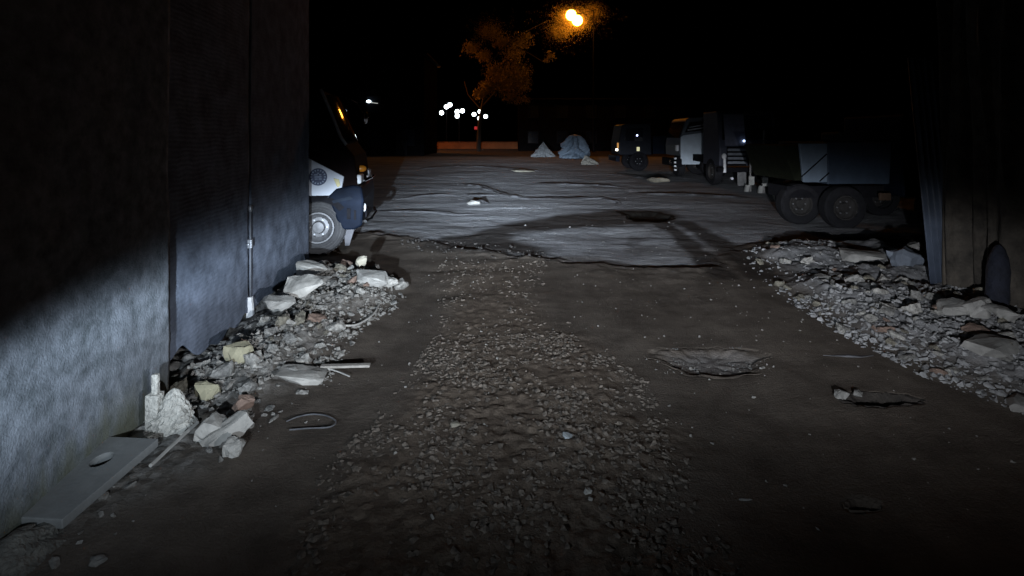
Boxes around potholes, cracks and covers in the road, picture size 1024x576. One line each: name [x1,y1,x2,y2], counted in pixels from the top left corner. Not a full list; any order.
pothole [643,347,774,379]
pothole [842,496,883,513]
pothole [838,391,926,408]
pothole [616,210,676,223]
crack [381,165,753,216]
